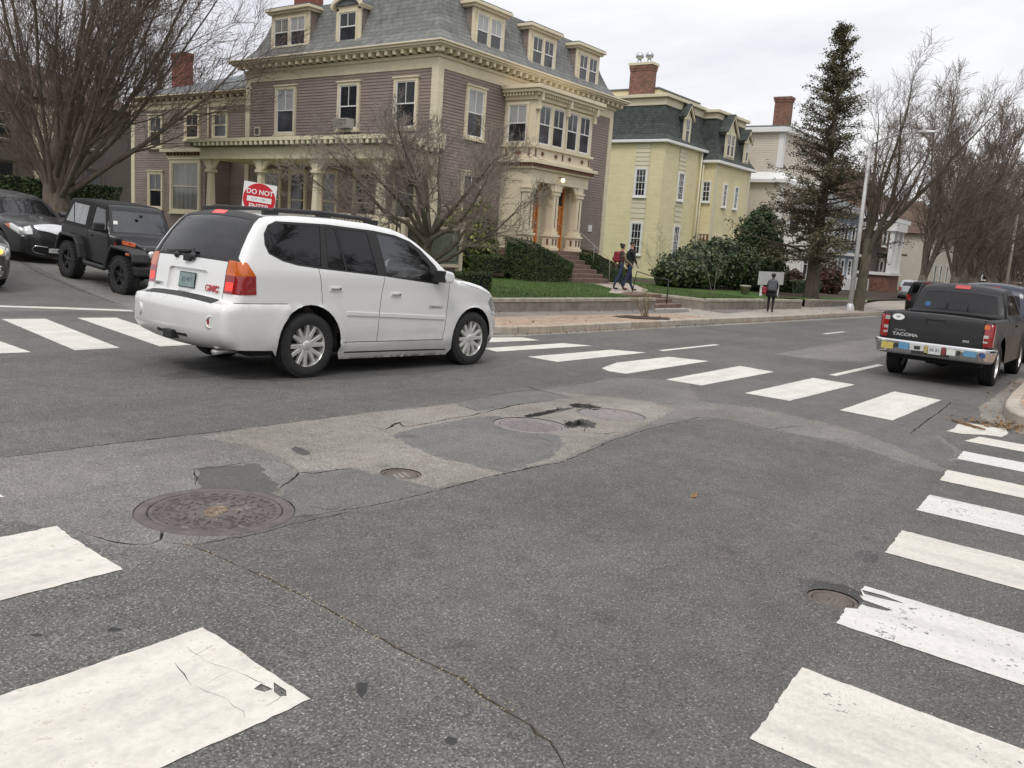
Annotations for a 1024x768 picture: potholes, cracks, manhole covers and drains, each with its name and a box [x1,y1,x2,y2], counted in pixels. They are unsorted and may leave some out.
manhole cover [133,488,295,536]
manhole cover [577,408,646,422]
utility cover [807,590,859,609]
utility cover [380,469,421,479]
manhole cover [493,418,568,433]
pothole [568,403,602,412]
crack [87,459,565,768]
pothole [563,420,587,428]
